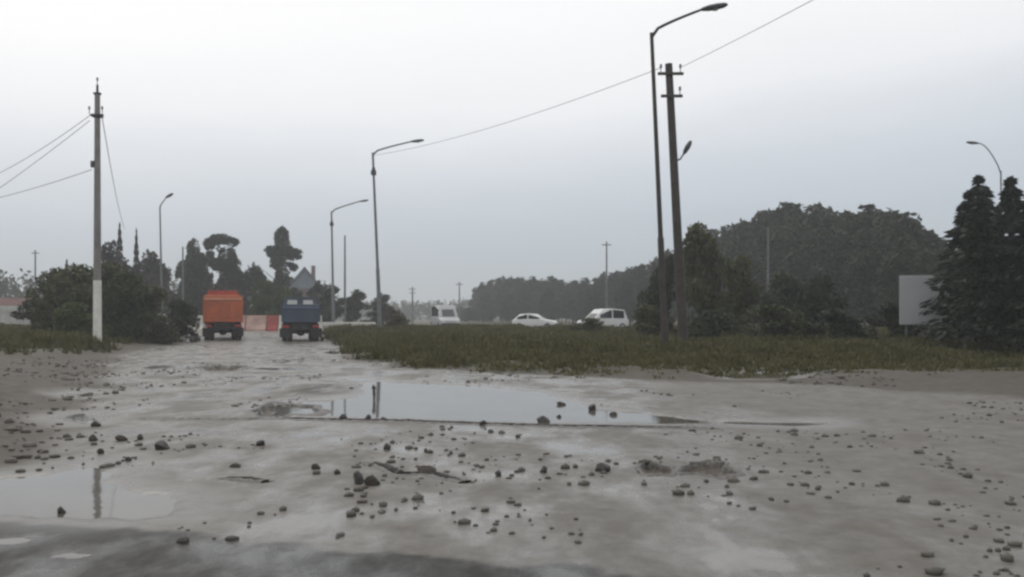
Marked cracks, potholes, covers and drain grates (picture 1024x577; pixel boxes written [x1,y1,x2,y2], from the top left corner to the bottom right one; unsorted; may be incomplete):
crack [364,461,468,483]
pothole [243,401,332,420]
